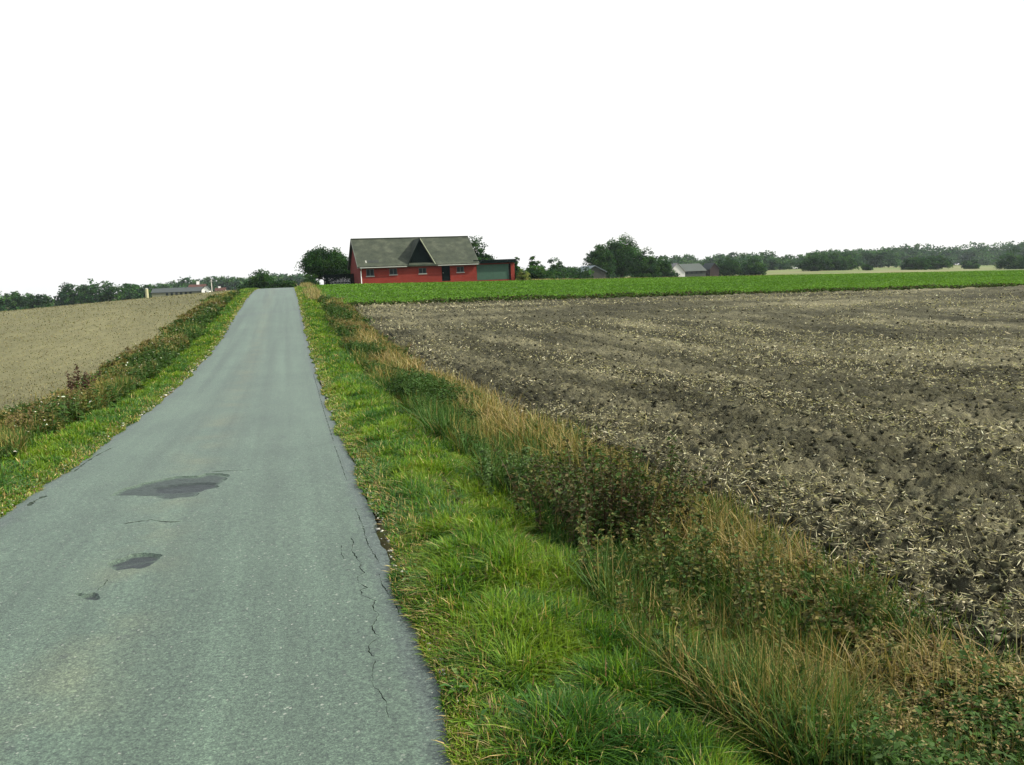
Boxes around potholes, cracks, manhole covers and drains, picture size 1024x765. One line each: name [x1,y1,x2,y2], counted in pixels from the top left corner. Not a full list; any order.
crack [314,377,402,717]
